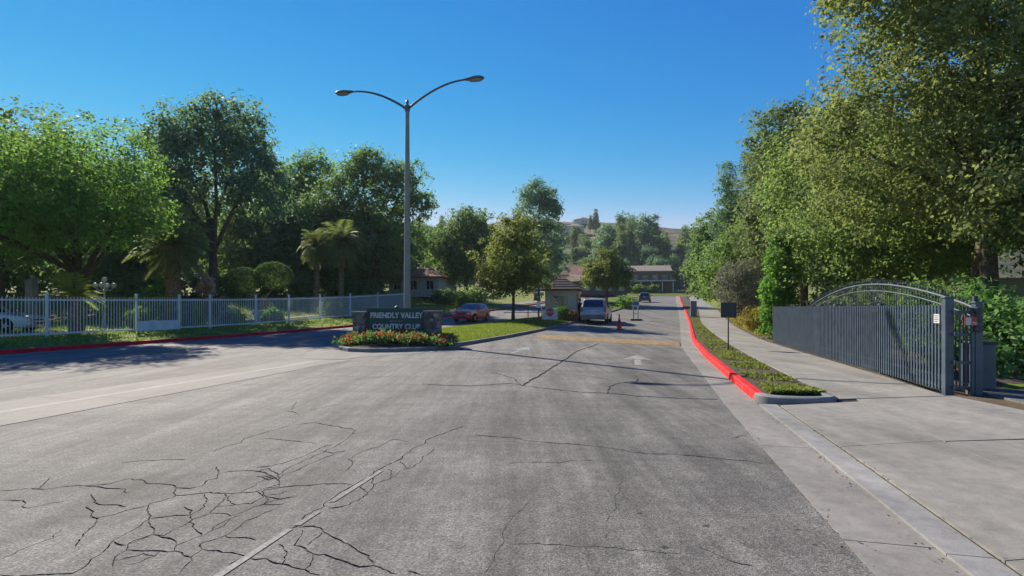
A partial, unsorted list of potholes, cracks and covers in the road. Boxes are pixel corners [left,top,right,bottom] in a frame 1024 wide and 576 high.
crack [0,422,463,576]
crack [486,478,681,572]
crack [477,435,757,463]
crack [428,372,718,400]
